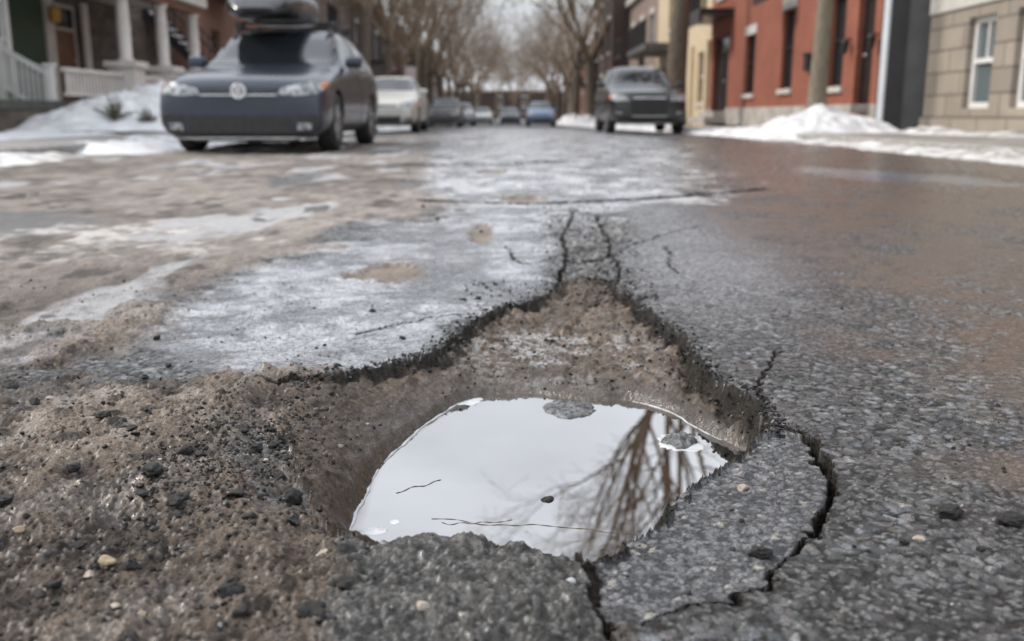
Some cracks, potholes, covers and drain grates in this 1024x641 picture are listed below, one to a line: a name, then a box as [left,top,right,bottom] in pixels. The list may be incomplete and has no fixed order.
pothole [466,223,497,244]
pothole [279,276,775,564]
crack [417,188,771,291]
pothole [334,261,429,284]
crack [582,426,843,641]
crack [752,351,785,403]
